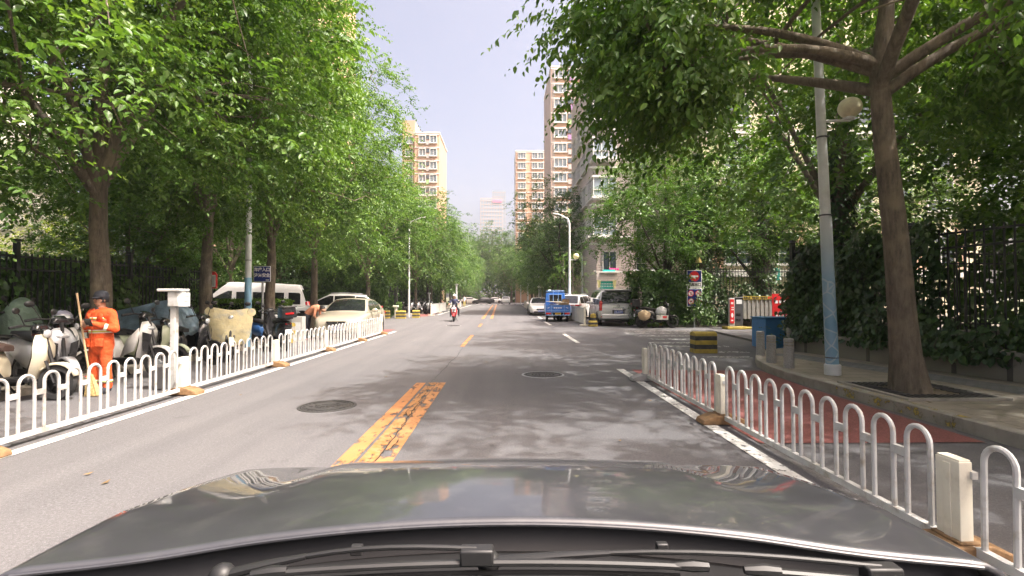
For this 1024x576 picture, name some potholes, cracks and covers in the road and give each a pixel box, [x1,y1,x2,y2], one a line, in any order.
manhole cover [297,400,357,413]
crack [373,385,430,462]
